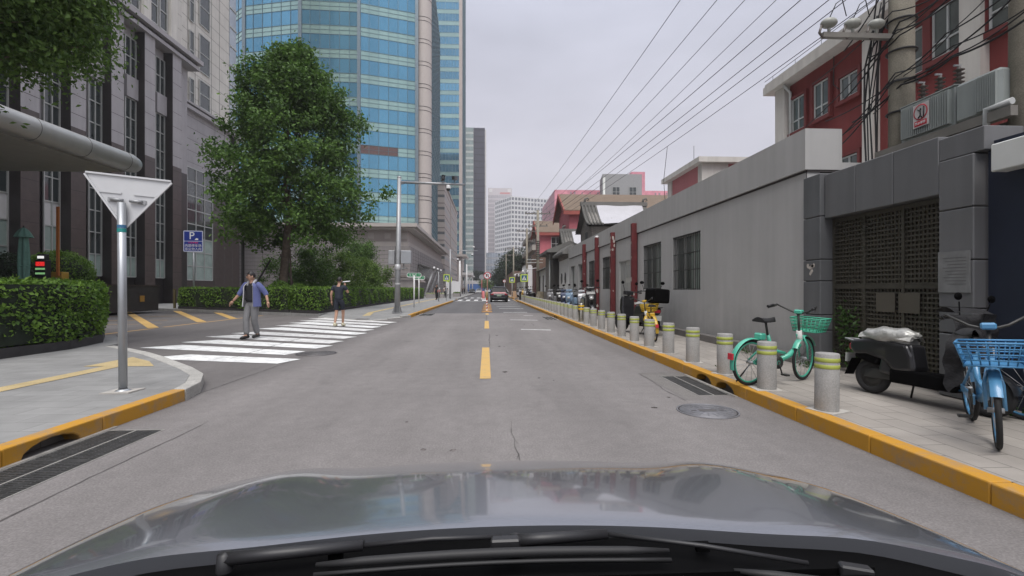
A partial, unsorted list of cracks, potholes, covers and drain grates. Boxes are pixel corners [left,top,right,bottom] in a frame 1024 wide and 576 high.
manhole cover [676,403,740,419]
drain grate [661,374,738,397]
drain grate [0,426,165,501]
